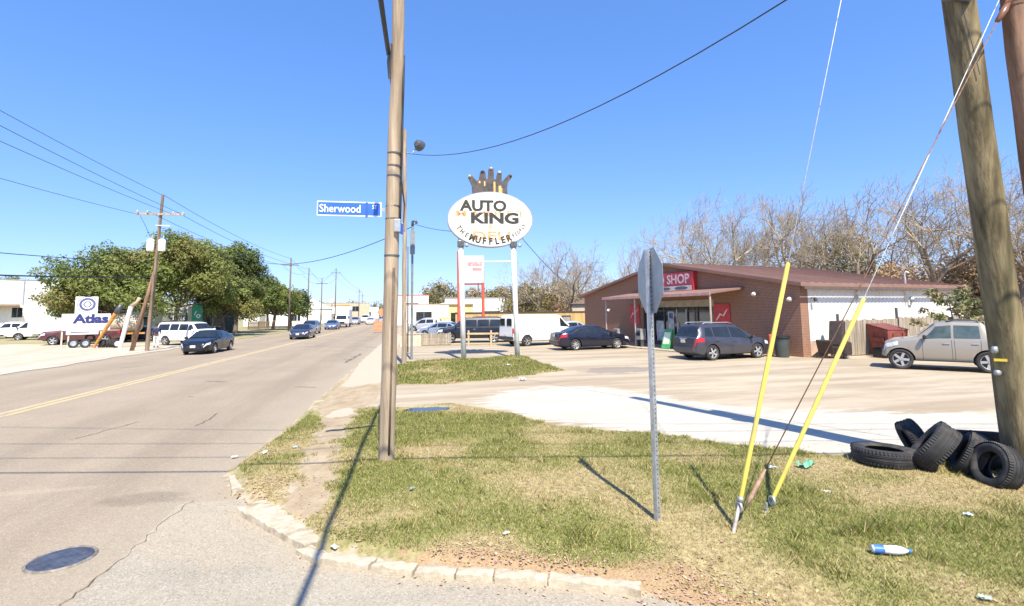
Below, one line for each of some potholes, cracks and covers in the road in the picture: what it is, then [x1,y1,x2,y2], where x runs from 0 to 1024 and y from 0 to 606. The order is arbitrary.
manhole cover [21,545,99,574]
